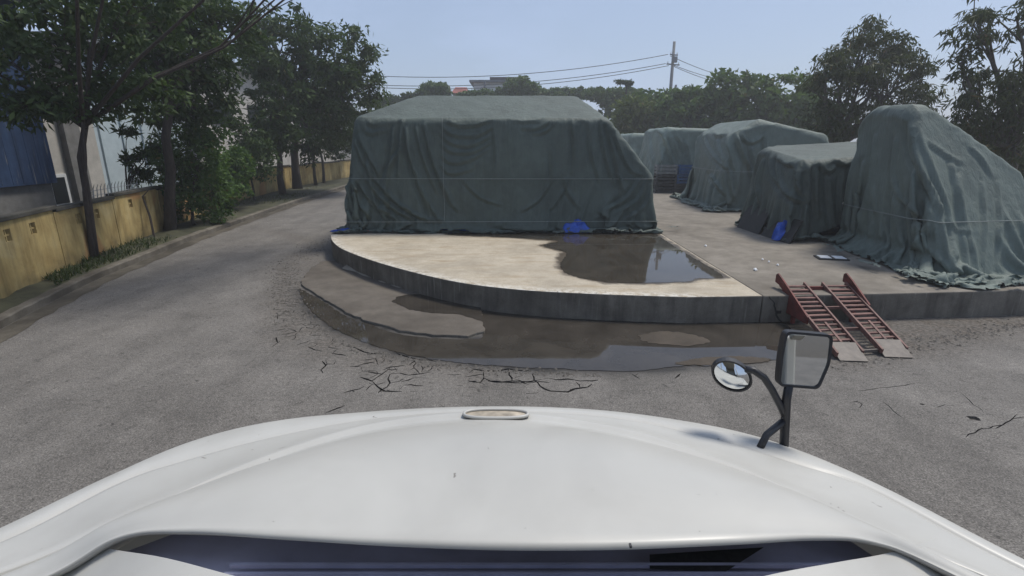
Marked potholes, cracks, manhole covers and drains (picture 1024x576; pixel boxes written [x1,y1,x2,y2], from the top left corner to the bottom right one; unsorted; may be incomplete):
crack [854,383,915,416]
crack [272,263,597,413]
crack [938,393,1022,437]
